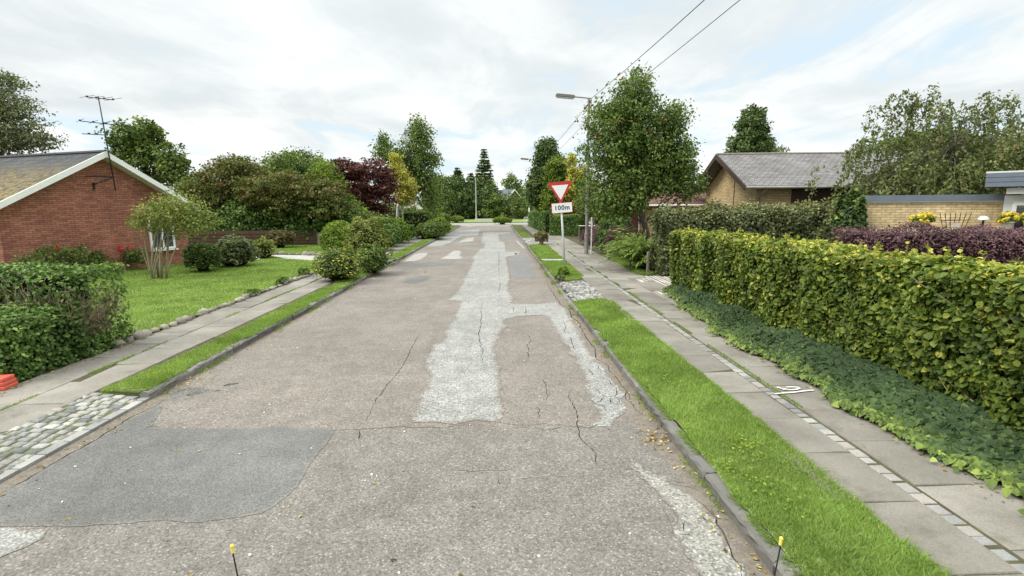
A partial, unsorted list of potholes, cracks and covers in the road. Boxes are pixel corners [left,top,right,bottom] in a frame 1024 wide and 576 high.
crack [526,283,646,464]
crack [336,338,465,438]
